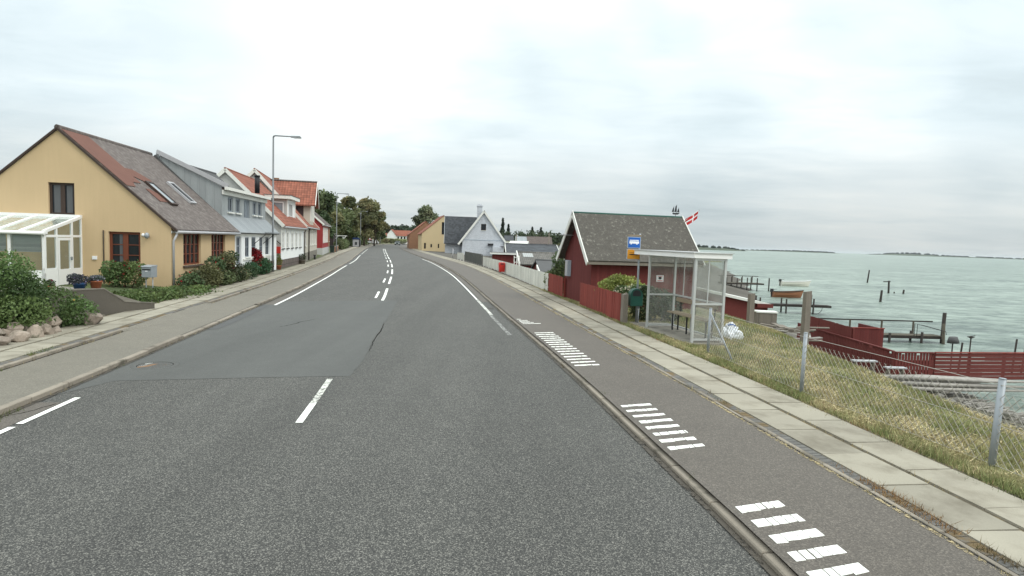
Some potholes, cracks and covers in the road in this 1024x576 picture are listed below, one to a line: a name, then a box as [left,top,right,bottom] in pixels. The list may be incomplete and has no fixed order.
manhole cover [130,361,179,370]
